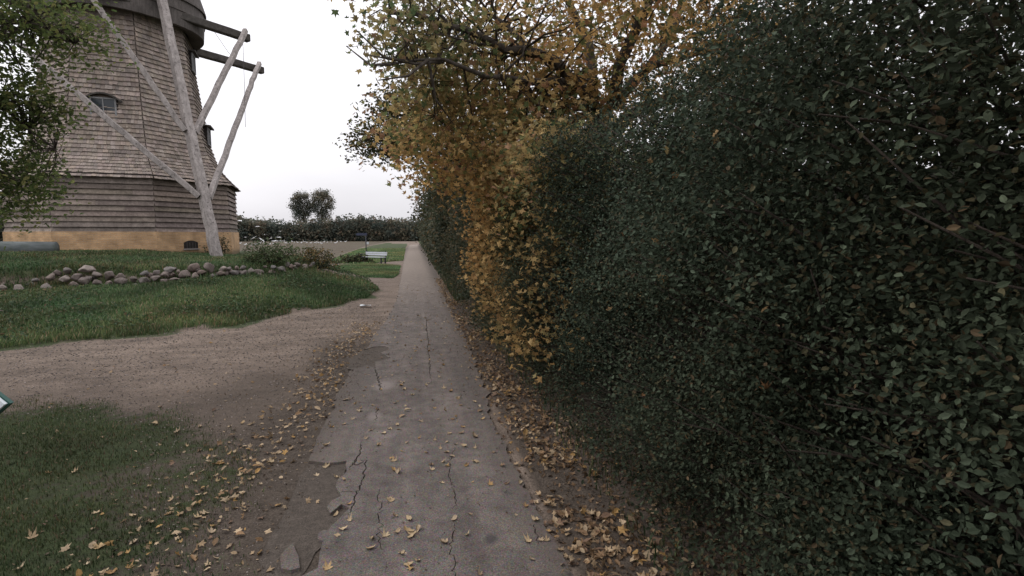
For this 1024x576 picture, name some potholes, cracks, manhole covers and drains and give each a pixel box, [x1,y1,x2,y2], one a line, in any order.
crack [350,446,382,550]
